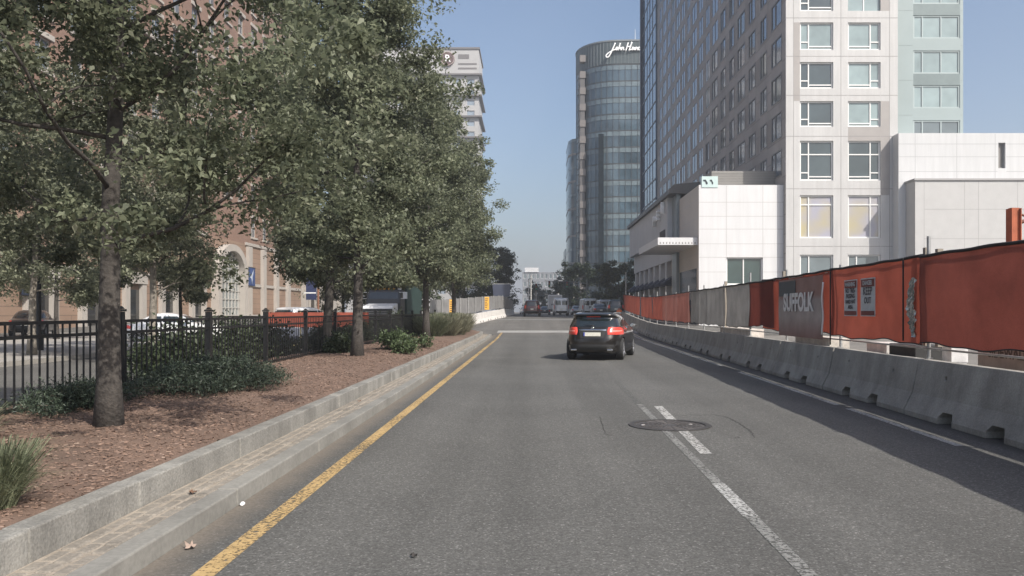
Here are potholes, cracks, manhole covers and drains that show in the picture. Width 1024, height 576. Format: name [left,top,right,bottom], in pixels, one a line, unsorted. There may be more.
manhole cover [629,419,712,431]
crack [684,415,756,438]
